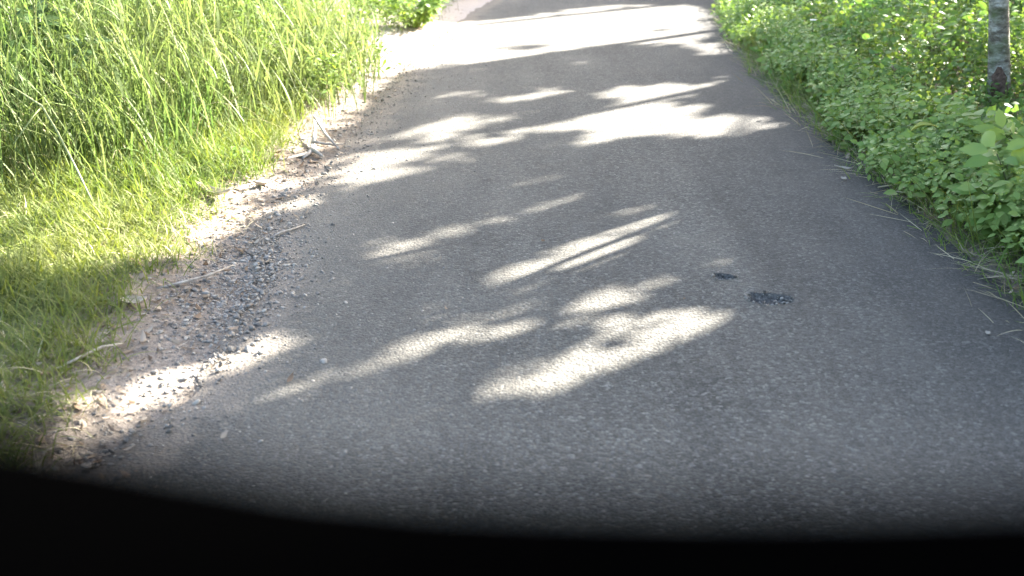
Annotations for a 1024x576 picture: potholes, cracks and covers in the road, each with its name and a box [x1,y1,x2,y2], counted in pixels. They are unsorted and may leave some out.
pothole [744,290,794,306]
pothole [709,272,737,280]
